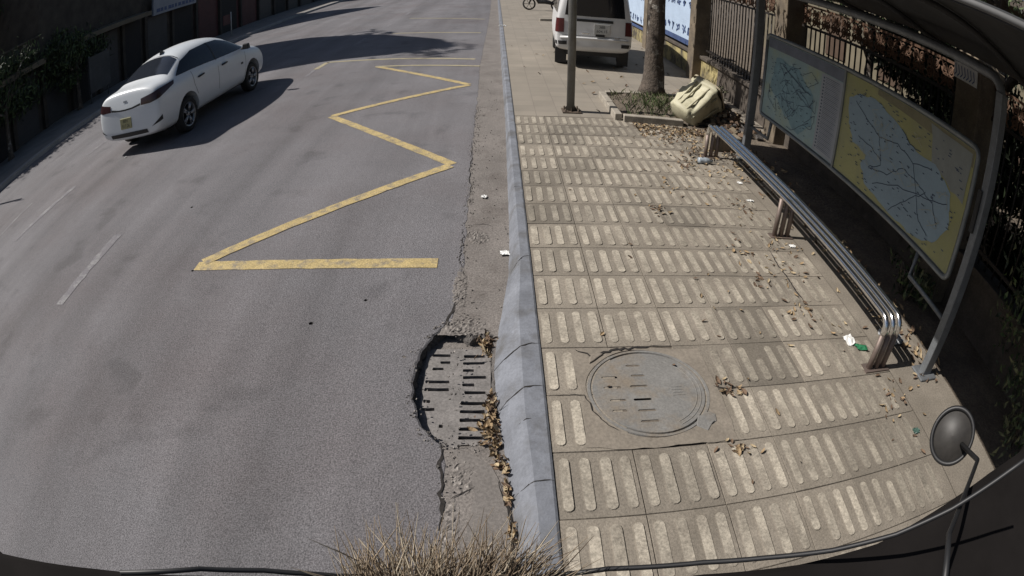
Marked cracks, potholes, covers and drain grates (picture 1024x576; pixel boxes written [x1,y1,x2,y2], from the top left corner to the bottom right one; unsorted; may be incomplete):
manhole cover [587,350,717,438]
crack [436,445,475,531]
crack [576,345,660,356]
